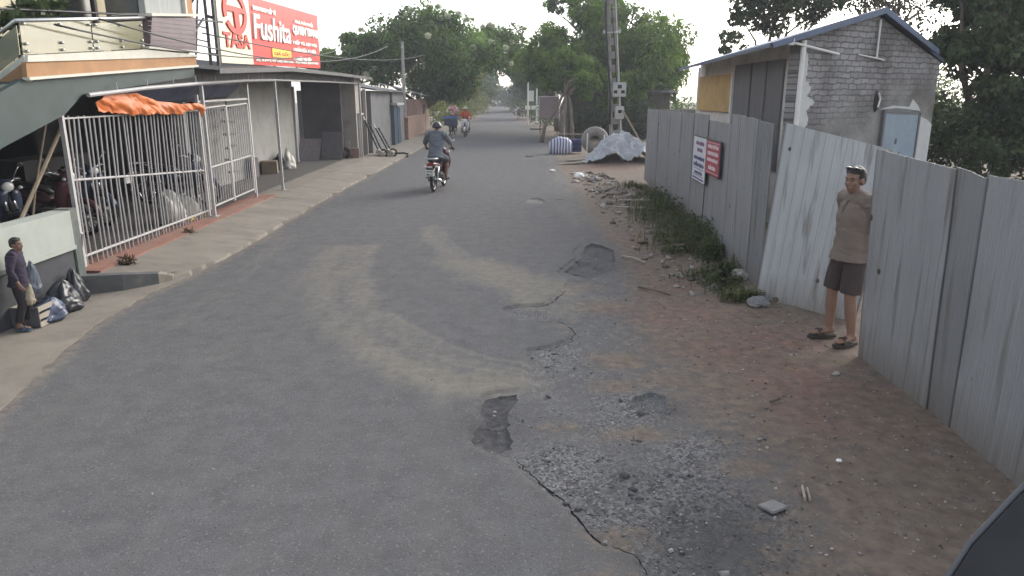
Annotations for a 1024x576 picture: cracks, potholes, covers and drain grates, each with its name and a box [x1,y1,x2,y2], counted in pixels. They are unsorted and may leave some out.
pothole [564,243,616,280]
crack [507,290,576,352]
pothole [471,395,518,454]
crack [517,461,648,576]
pothole [627,392,672,417]
